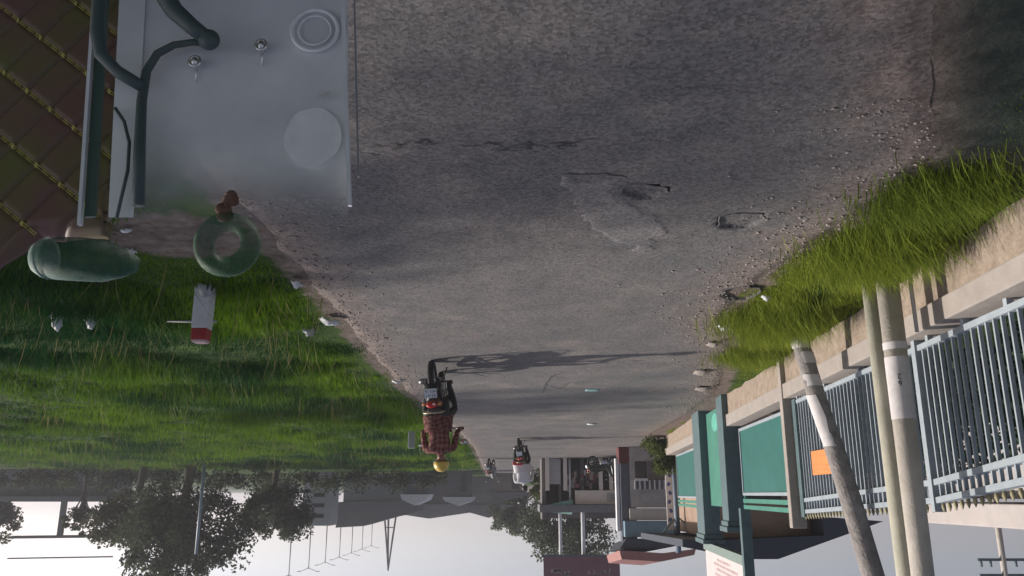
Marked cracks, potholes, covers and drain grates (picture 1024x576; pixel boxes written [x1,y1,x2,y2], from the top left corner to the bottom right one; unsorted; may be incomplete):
pothole [721,285,761,300]
pothole [620,184,669,200]
pothole [717,212,766,229]
